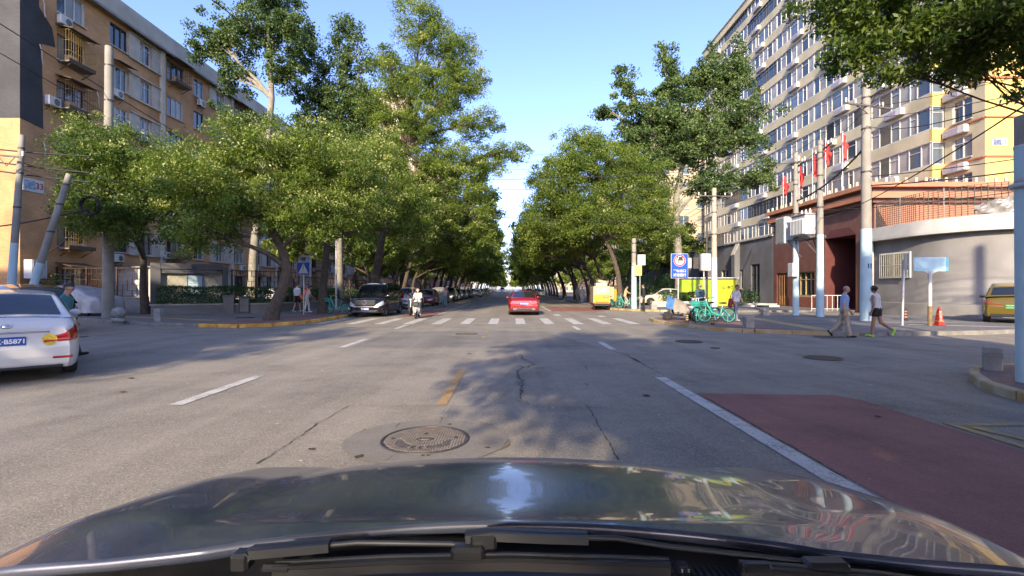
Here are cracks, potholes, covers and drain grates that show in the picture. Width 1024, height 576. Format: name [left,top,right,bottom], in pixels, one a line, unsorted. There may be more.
crack [516,354,533,404]
crack [256,406,348,464]
crack [585,404,619,460]
manhole cover [380,426,470,455]
